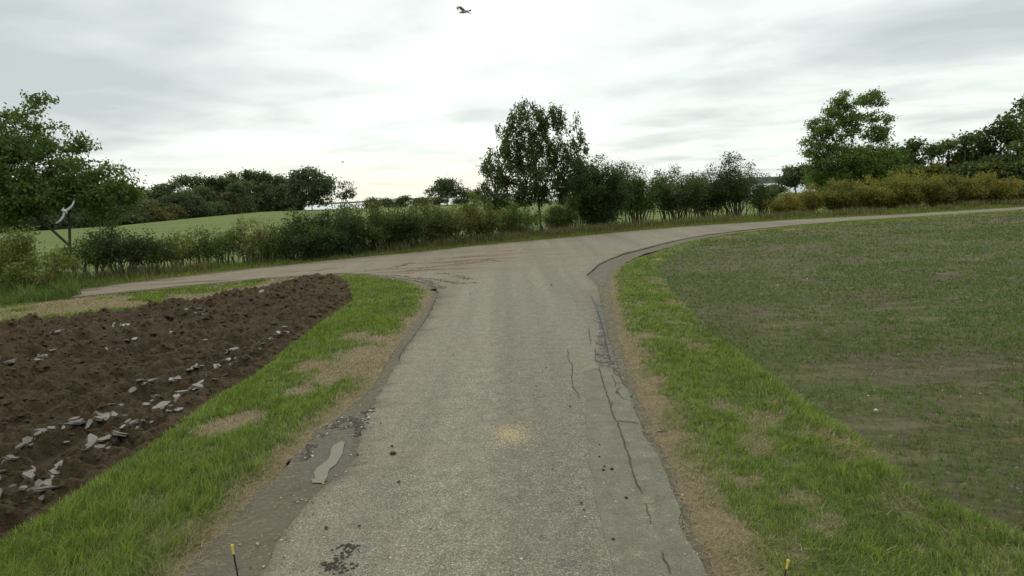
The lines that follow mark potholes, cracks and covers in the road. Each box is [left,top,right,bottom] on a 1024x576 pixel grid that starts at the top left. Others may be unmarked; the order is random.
crack [589,296,651,524]
